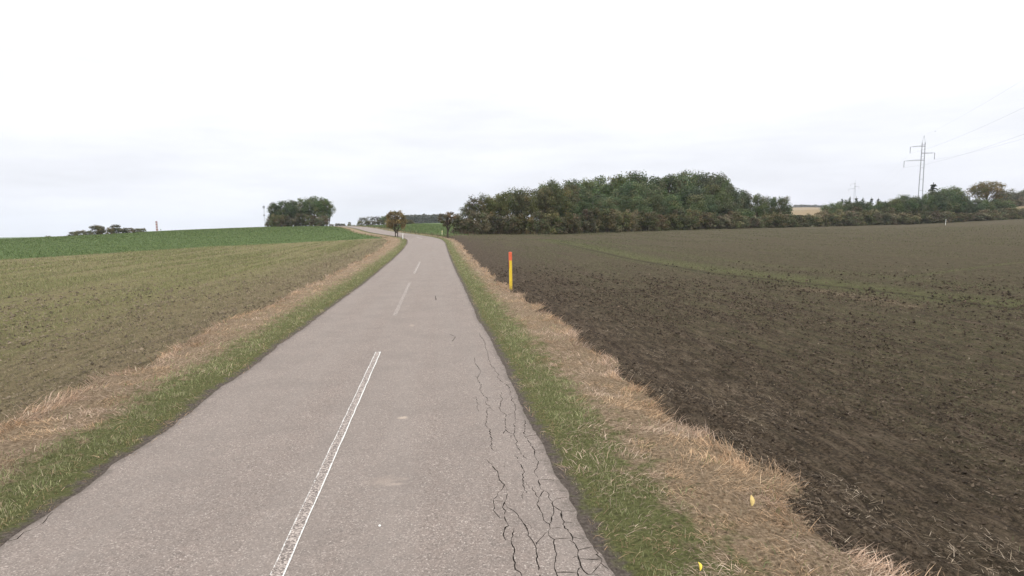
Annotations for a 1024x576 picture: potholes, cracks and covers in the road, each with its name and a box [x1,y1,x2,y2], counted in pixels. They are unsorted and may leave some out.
crack [474,337,608,576]
